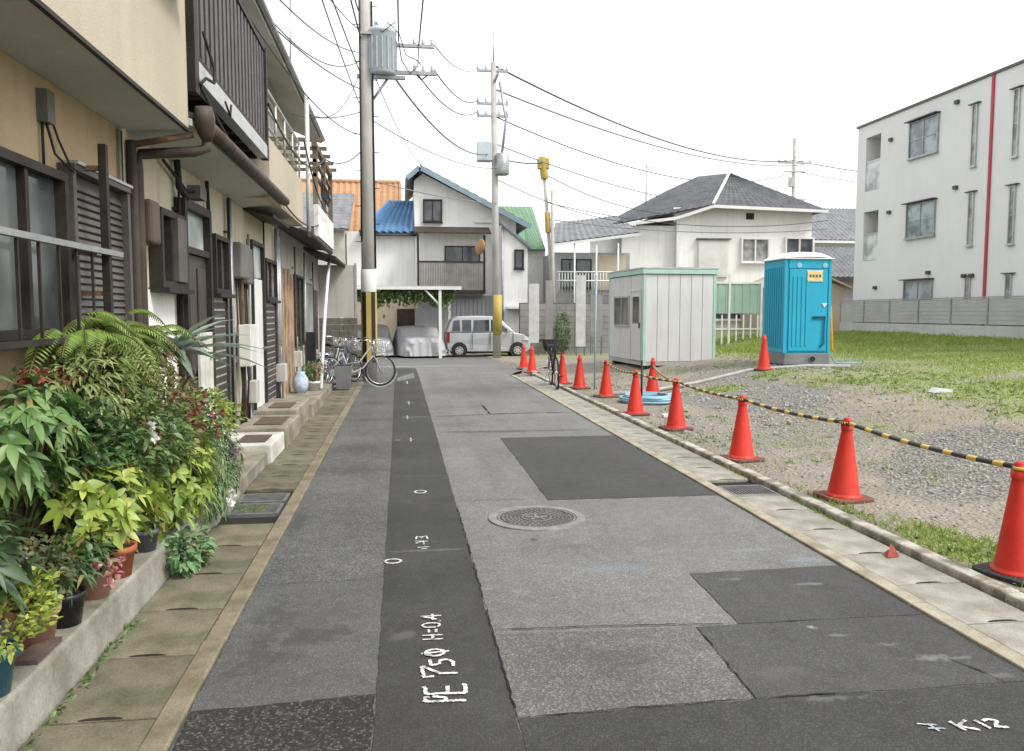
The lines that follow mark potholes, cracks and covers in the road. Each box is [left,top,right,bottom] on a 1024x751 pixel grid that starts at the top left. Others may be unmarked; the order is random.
drain grate [717,485,781,497]
manhole cover [488,506,585,531]
